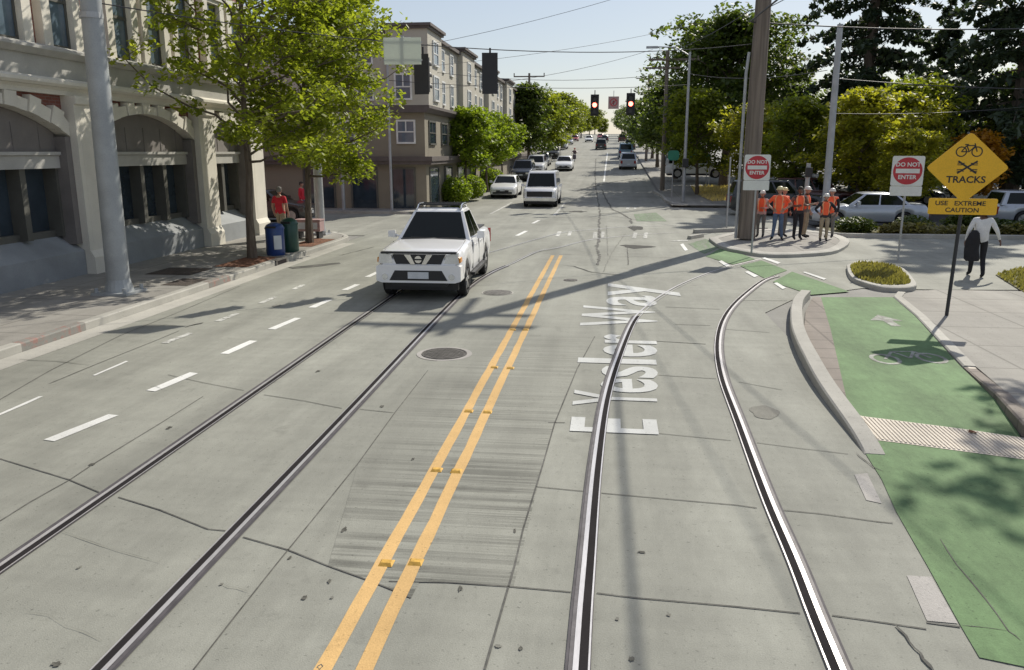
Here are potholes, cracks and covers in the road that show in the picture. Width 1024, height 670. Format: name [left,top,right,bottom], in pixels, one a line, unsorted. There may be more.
manhole cover [417,347,472,361]
crack [895,539,1019,670]
crack [521,190,654,275]
